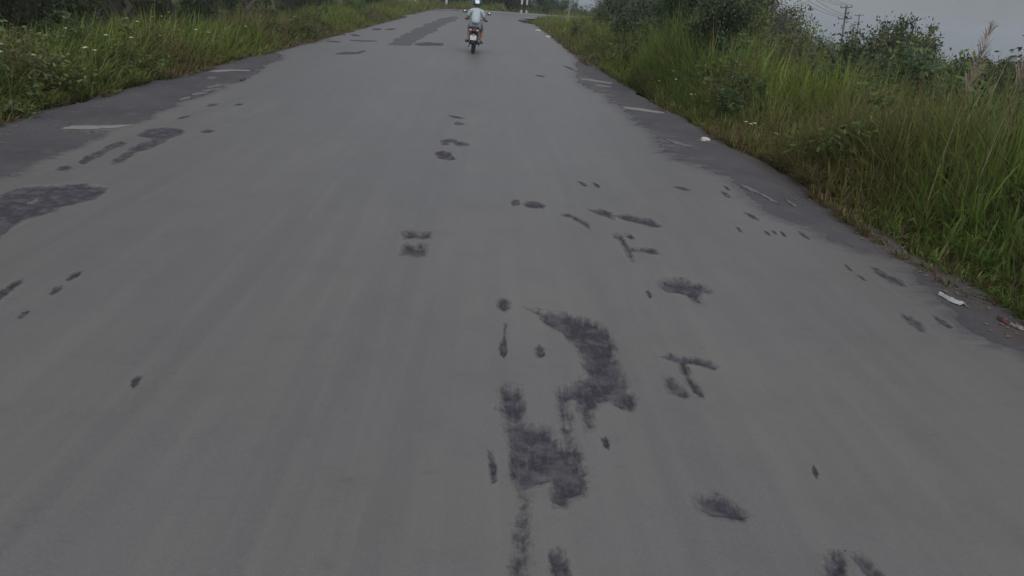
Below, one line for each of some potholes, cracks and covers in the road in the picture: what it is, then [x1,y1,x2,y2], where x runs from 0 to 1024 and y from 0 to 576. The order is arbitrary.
pothole [814,547,887,576]
pothole [398,229,433,258]
pothole [655,276,715,307]
pothole [434,150,457,161]
pothole [493,306,640,576]
pothole [688,488,755,526]
